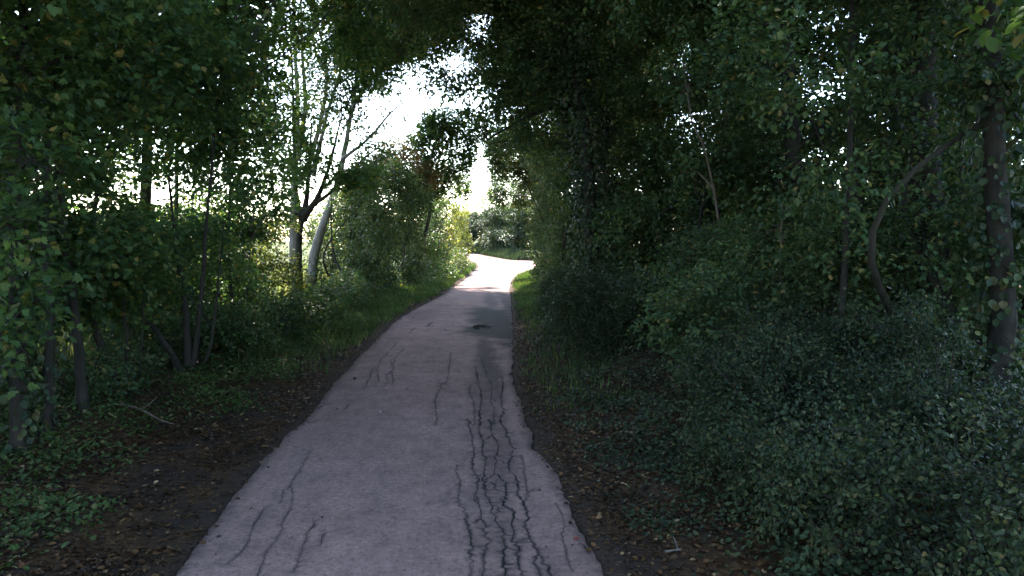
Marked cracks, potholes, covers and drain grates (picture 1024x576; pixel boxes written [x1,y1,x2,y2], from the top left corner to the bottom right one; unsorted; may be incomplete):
crack [366,316,451,384]
crack [235,457,307,576]
crack [456,362,587,576]
